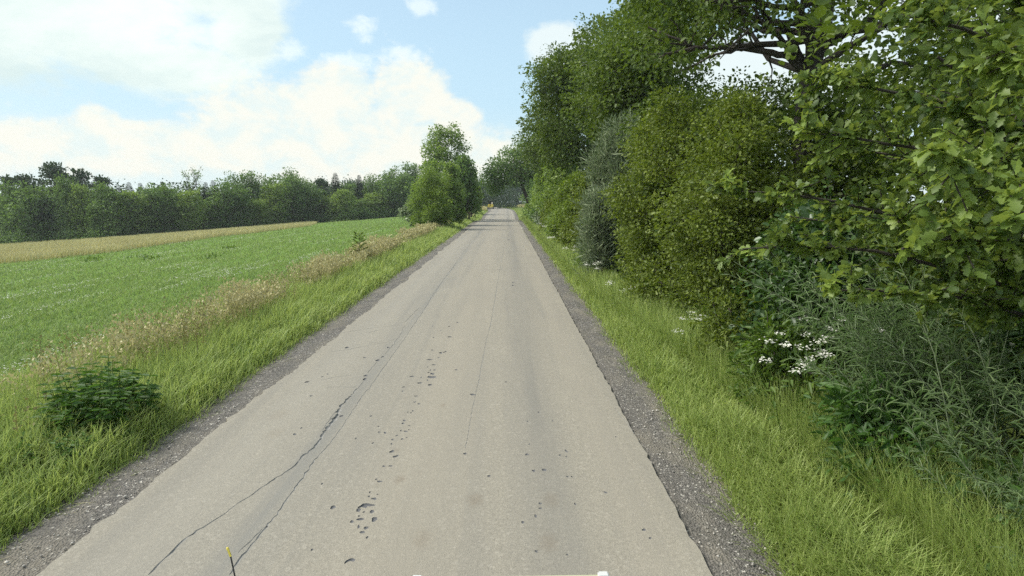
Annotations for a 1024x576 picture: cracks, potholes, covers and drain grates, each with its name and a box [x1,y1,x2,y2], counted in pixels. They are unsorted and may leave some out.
crack [148,307,420,575]
